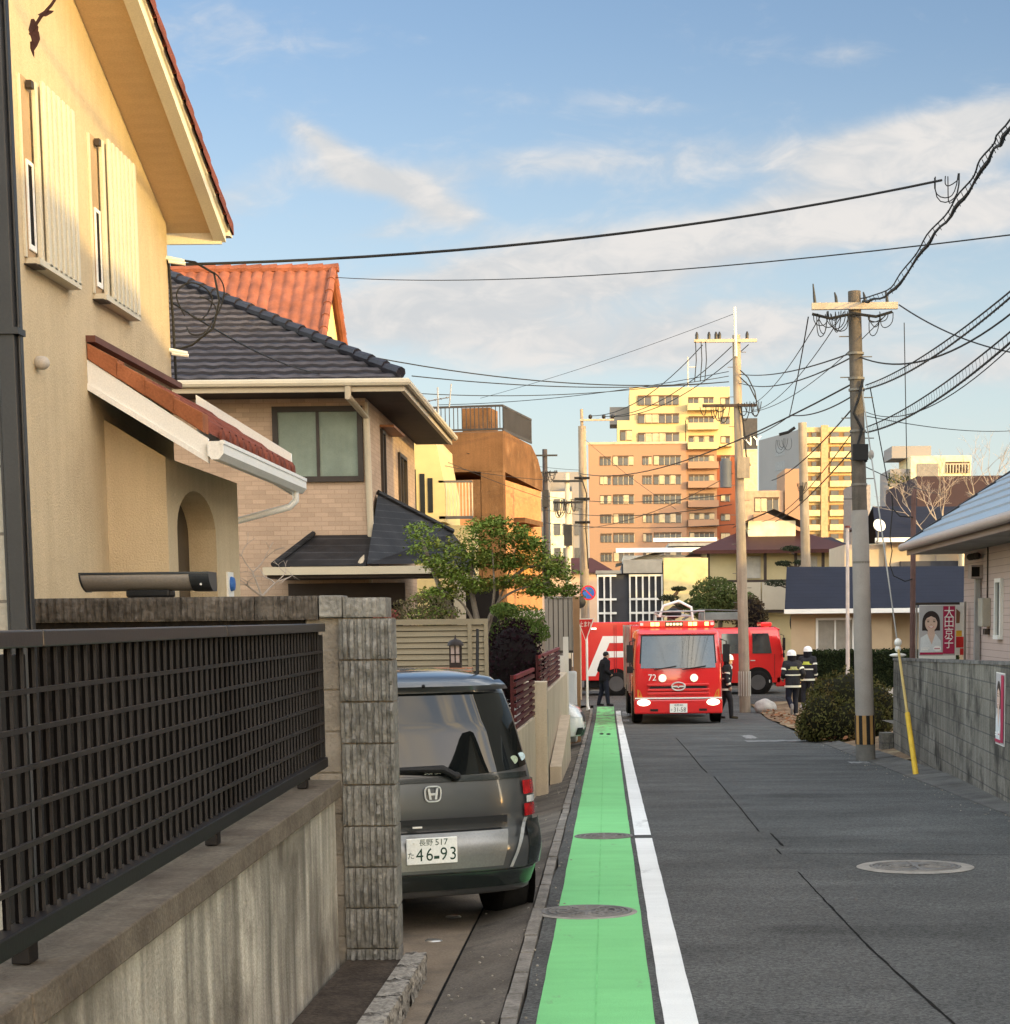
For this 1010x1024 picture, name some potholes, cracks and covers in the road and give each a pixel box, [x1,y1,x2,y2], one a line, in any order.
manhole cover [856,860,974,874]
manhole cover [542,904,637,919]
